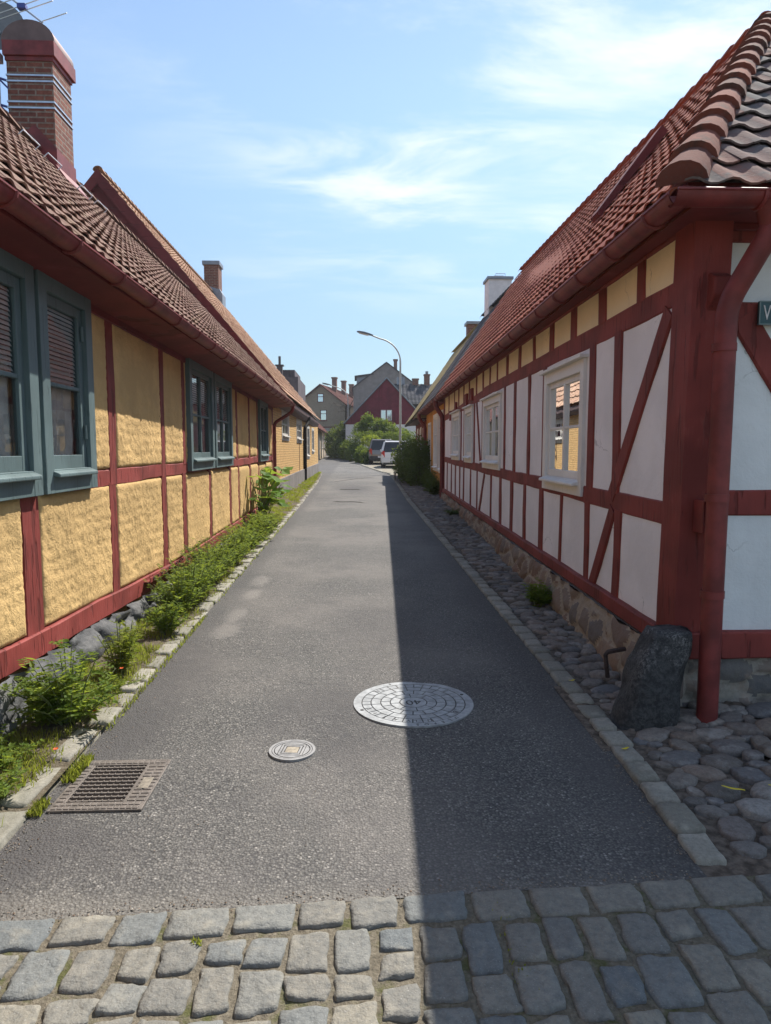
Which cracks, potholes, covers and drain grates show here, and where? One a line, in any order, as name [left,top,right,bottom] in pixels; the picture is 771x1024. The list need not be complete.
manhole cover [269,740,315,762]
drain grate [46,759,172,814]
manhole cover [353,682,474,728]
